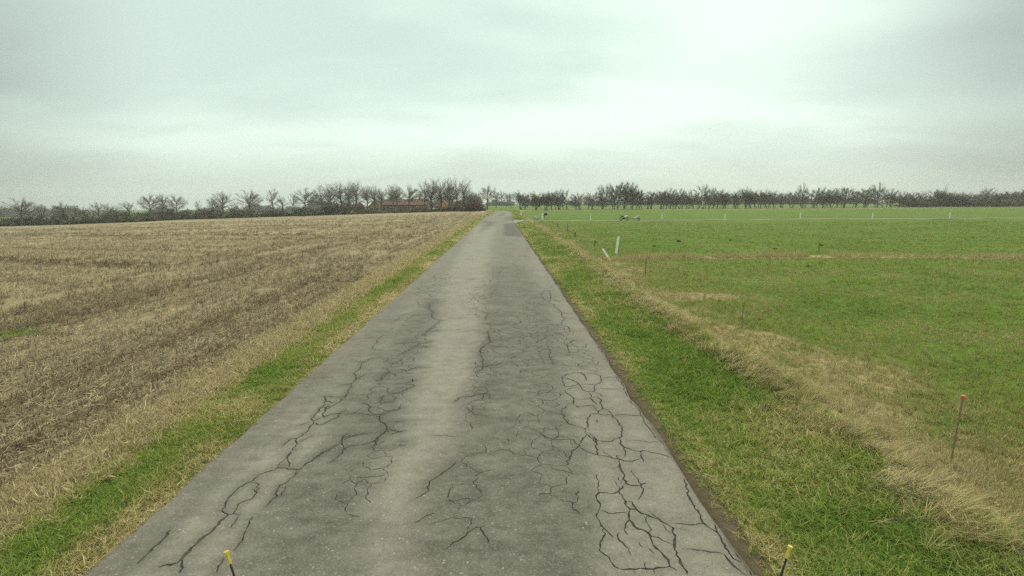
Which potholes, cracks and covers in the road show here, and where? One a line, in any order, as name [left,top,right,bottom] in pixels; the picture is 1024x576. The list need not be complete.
crack [137,274,449,573]
crack [415,268,752,576]
